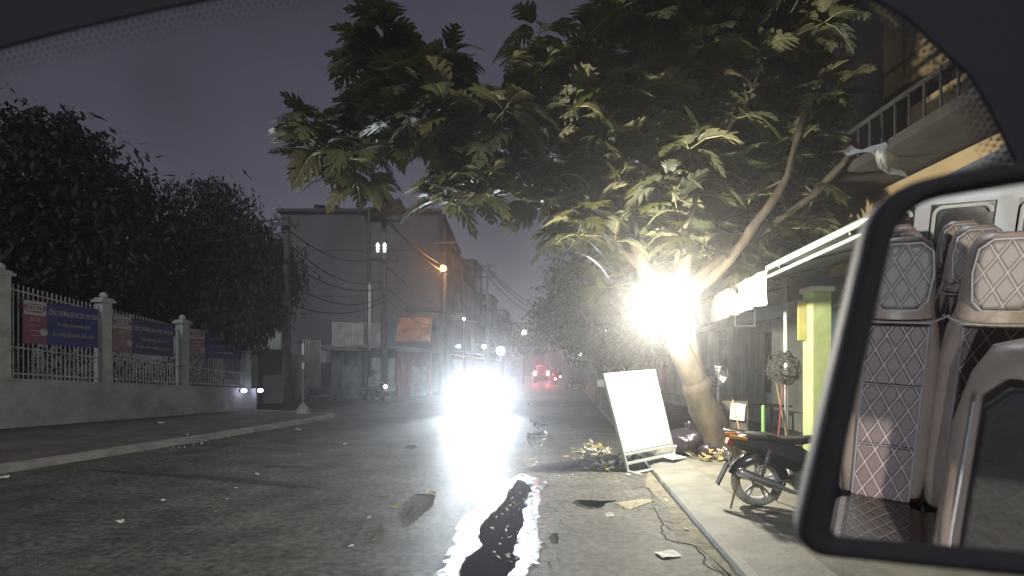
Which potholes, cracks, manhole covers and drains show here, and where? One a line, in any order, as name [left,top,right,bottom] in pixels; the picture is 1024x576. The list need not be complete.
pothole [571,500,615,510]
crack [633,487,725,576]
pothole [459,479,535,576]
